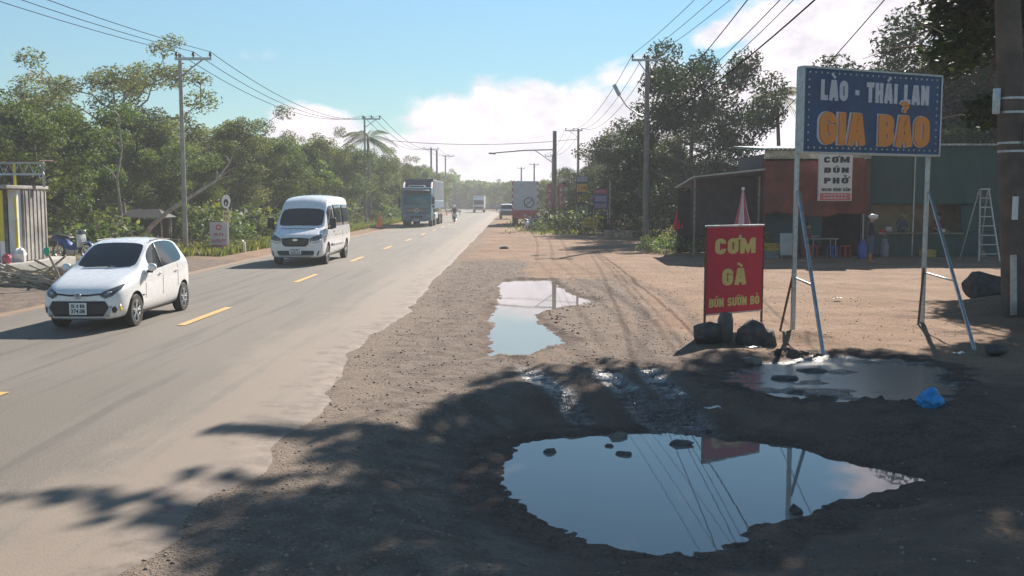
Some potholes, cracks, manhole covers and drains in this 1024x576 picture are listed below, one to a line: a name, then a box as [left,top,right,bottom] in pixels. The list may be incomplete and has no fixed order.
pothole [685,347,996,409]
pothole [472,277,616,357]
pothole [477,424,954,563]
